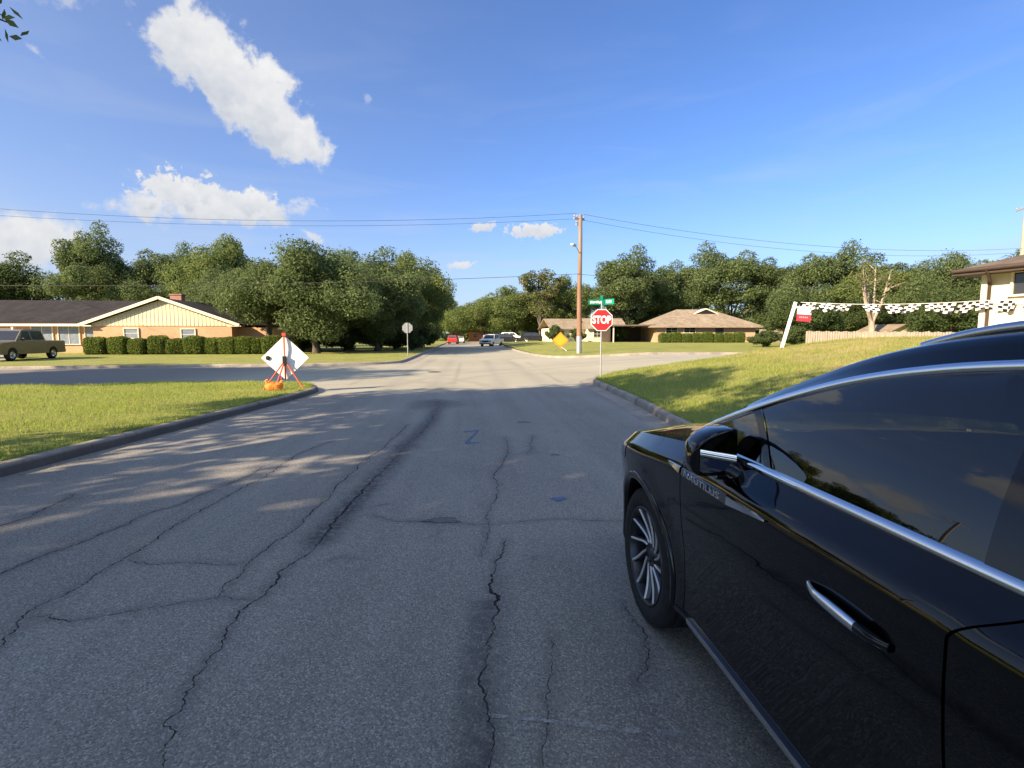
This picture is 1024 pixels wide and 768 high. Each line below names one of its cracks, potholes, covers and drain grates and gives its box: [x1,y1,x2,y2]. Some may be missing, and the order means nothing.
crack [623,605,650,684]
crack [2,416,433,767]
crack [378,437,612,768]
